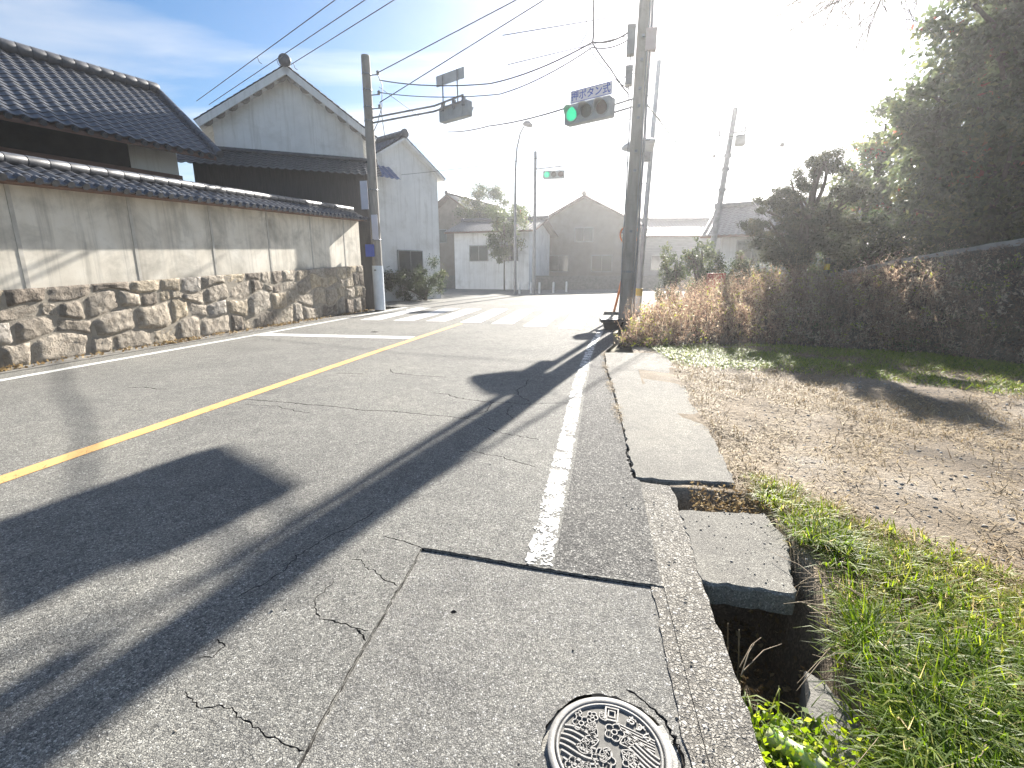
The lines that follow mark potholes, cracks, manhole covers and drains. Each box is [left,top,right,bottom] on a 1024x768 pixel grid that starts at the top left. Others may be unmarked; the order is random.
crack [352,559,397,586]
crack [314,581,368,641]
crack [185,692,305,752]
manhole cover [542,697,678,768]
